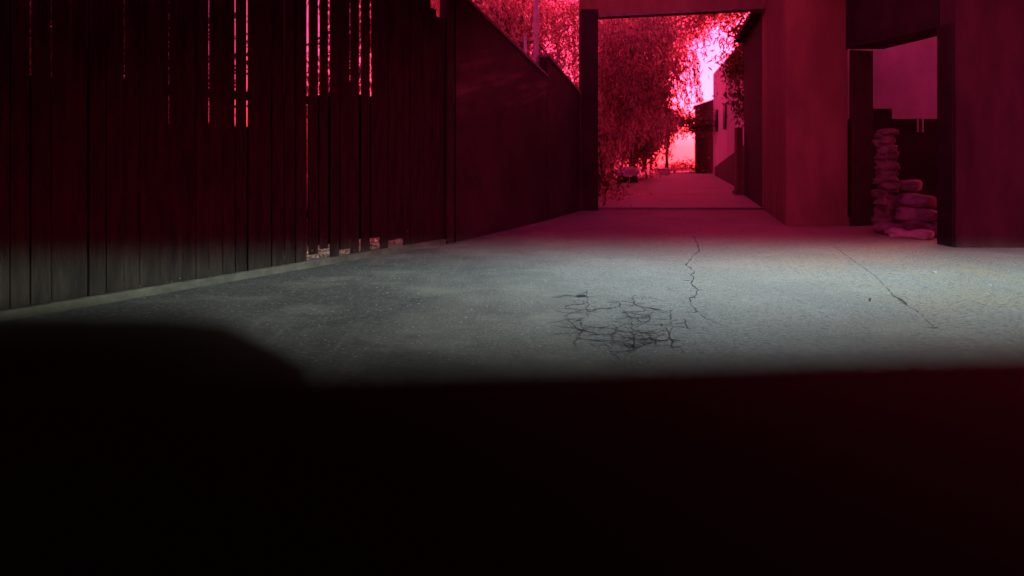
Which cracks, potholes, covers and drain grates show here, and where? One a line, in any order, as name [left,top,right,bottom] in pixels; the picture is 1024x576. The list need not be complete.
crack [850,258,920,314]
crack [548,258,712,326]
